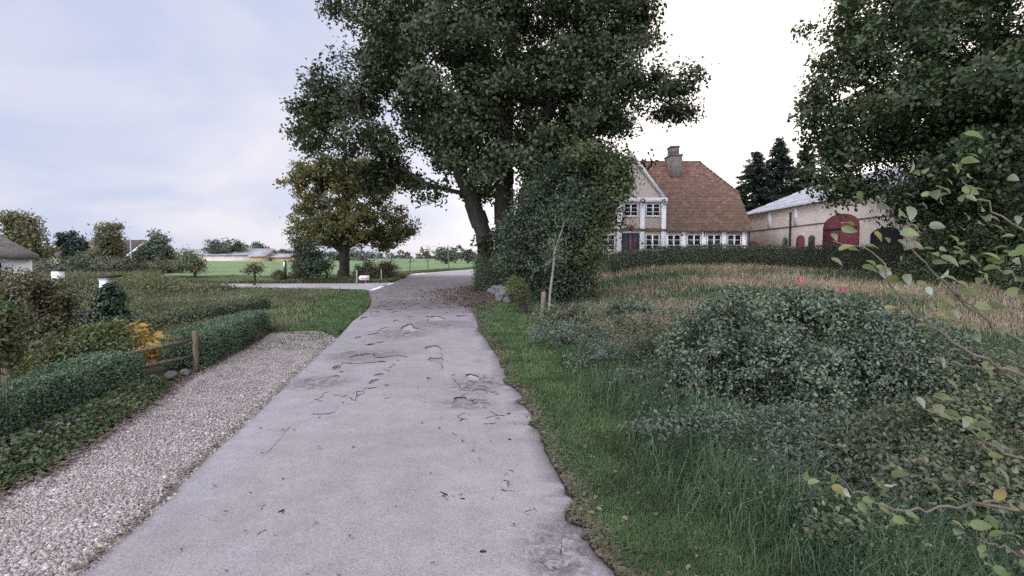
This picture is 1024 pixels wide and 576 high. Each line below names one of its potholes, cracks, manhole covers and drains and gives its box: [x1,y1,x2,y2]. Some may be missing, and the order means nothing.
crack [308,299,437,418]
crack [441,353,505,443]
